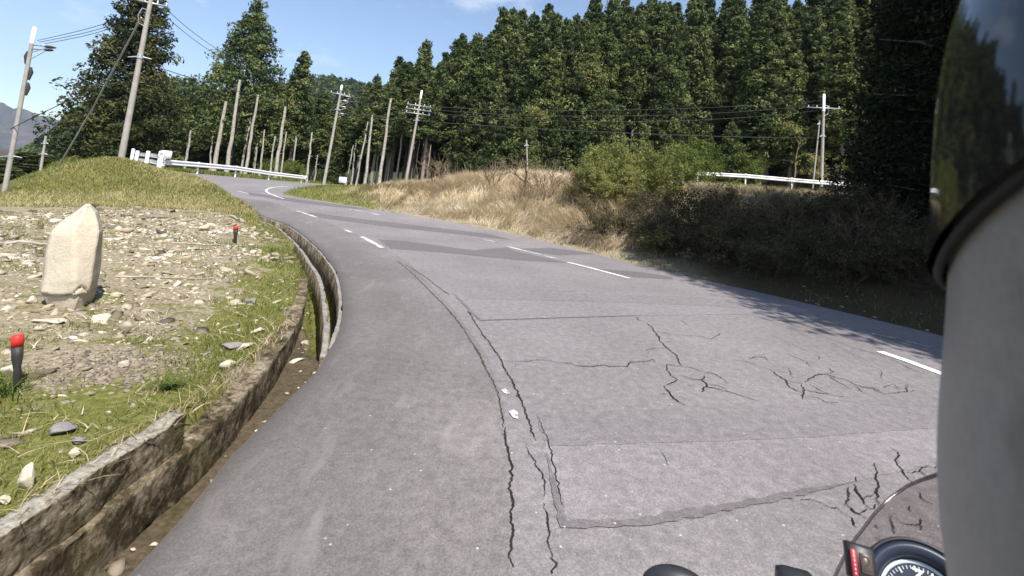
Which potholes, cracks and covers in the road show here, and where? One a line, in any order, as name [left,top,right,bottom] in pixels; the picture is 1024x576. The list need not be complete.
crack [801,448,936,533]
crack [467,310,761,573]
crack [741,335,913,403]
